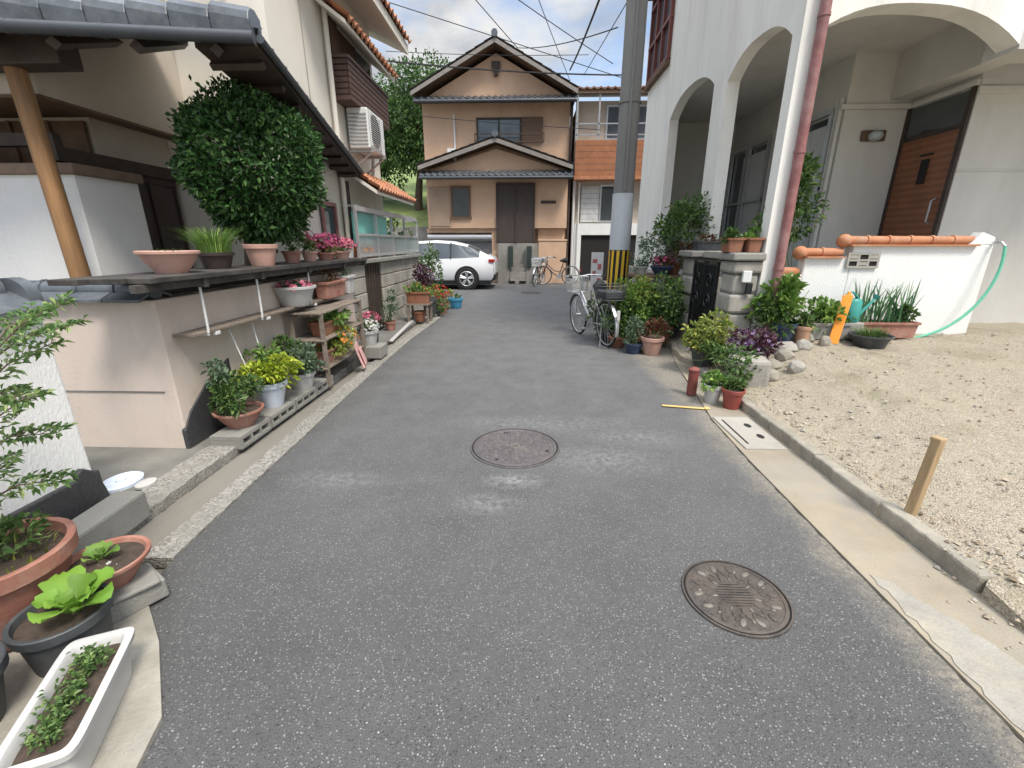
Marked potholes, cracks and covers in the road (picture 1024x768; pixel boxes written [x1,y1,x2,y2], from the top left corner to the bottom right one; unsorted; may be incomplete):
manhole cover [470,428,560,469]
manhole cover [681,560,794,639]
